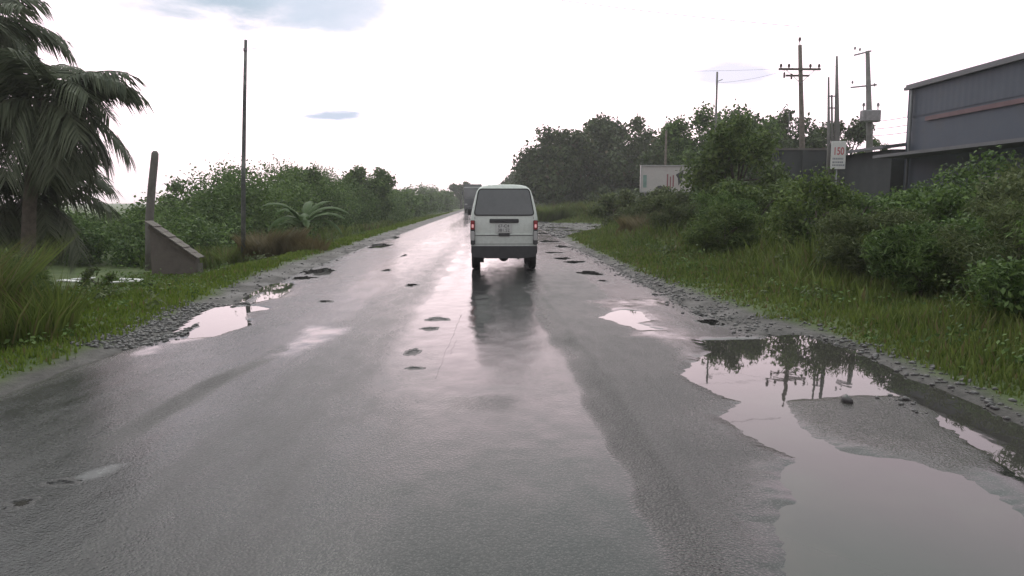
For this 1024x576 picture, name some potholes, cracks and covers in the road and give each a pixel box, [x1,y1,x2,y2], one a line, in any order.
pothole [298,268,337,276]
pothole [694,319,728,327]
pothole [38,477,80,488]
pothole [403,348,422,356]
crack [435,315,461,379]
pothole [2,496,41,511]
